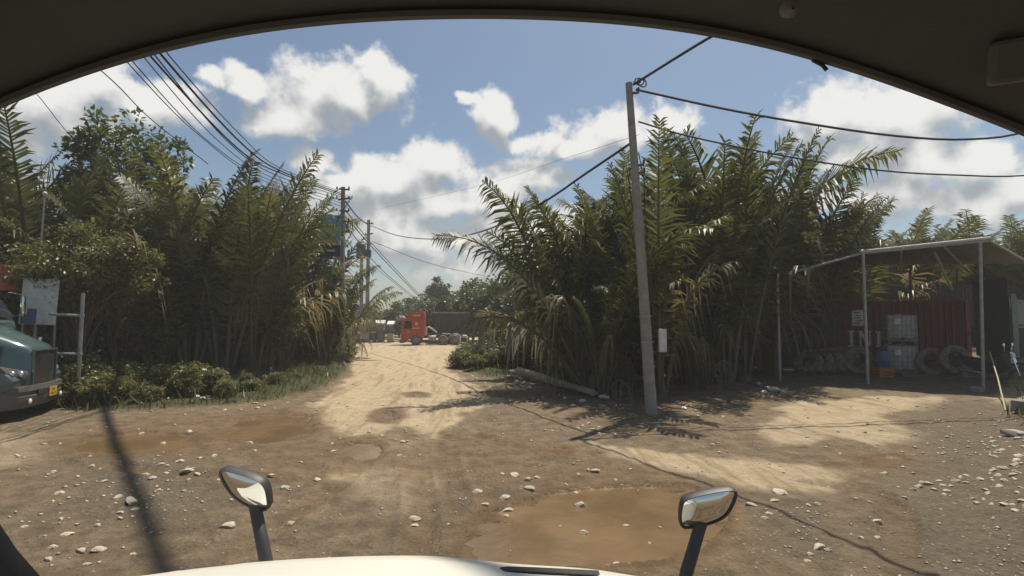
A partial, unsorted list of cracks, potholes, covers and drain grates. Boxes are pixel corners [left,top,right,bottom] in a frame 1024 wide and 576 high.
pothole [443,470,791,576]
pothole [36,428,228,458]
pothole [321,438,402,464]
pothole [361,409,411,423]
